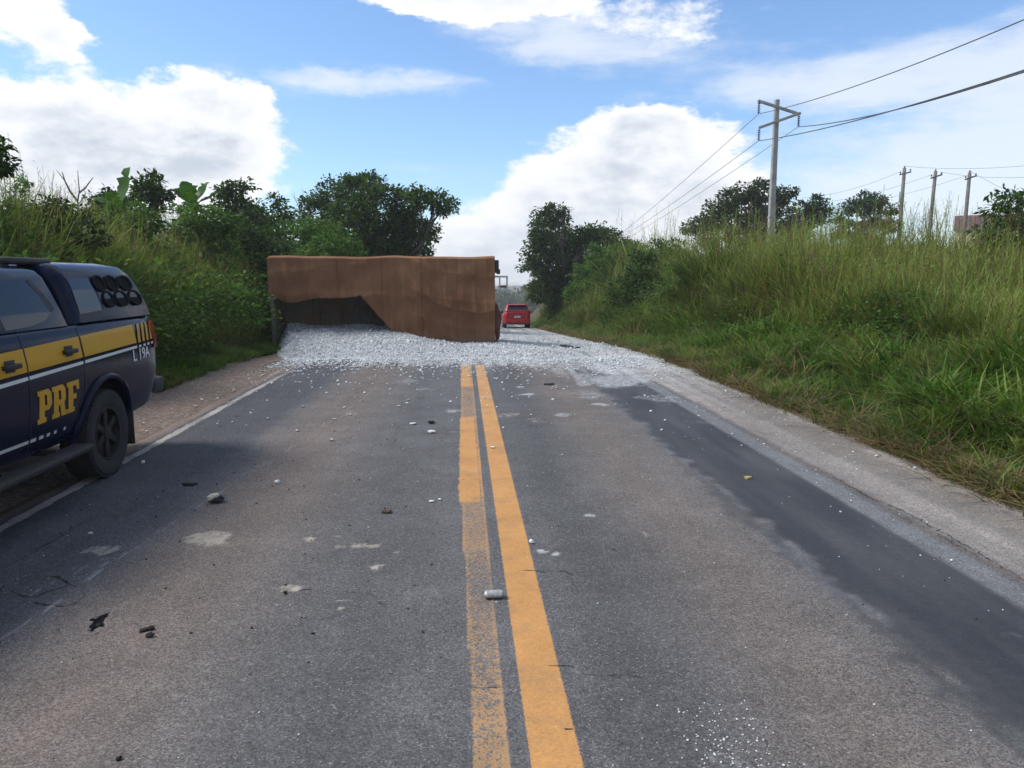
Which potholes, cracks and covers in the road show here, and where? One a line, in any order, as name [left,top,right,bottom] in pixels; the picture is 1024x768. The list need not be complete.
crack [8,514,97,565]
crack [0,576,84,607]
